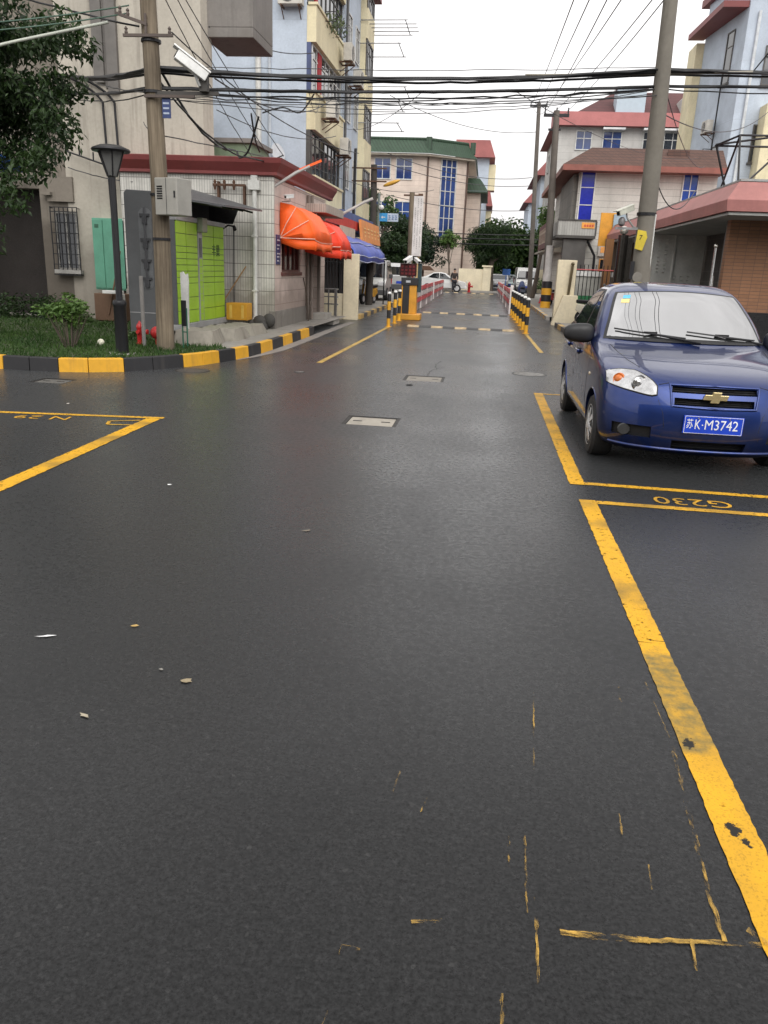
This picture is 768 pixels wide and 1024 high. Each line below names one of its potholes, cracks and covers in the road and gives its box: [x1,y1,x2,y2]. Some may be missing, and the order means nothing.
manhole cover [342,416,400,427]
